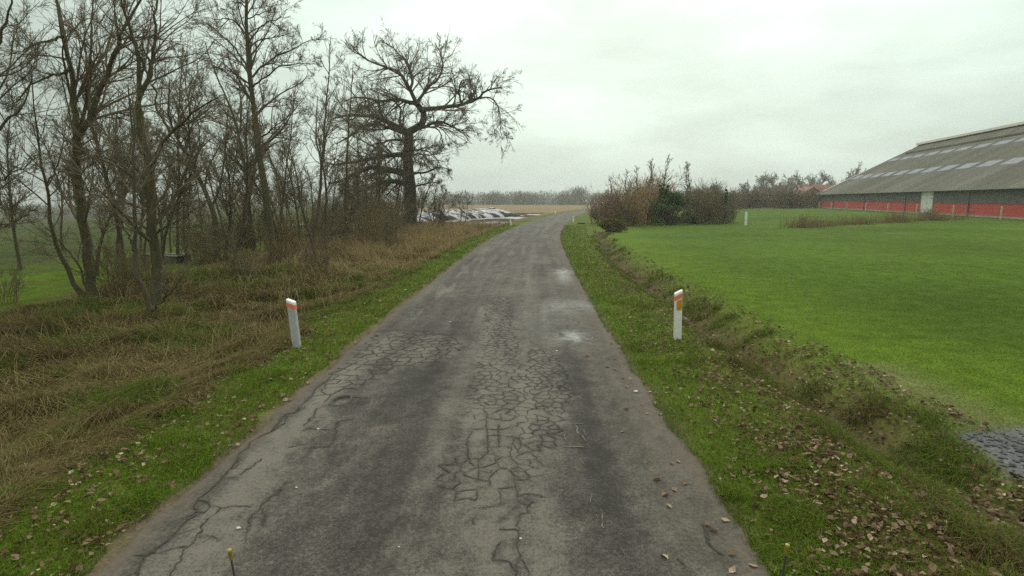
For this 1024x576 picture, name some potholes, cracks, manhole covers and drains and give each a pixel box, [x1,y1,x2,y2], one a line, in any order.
crack [437,296,586,576]
crack [134,374,347,576]
crack [677,514,744,568]
pothole [328,394,353,406]
crack [314,331,462,404]
